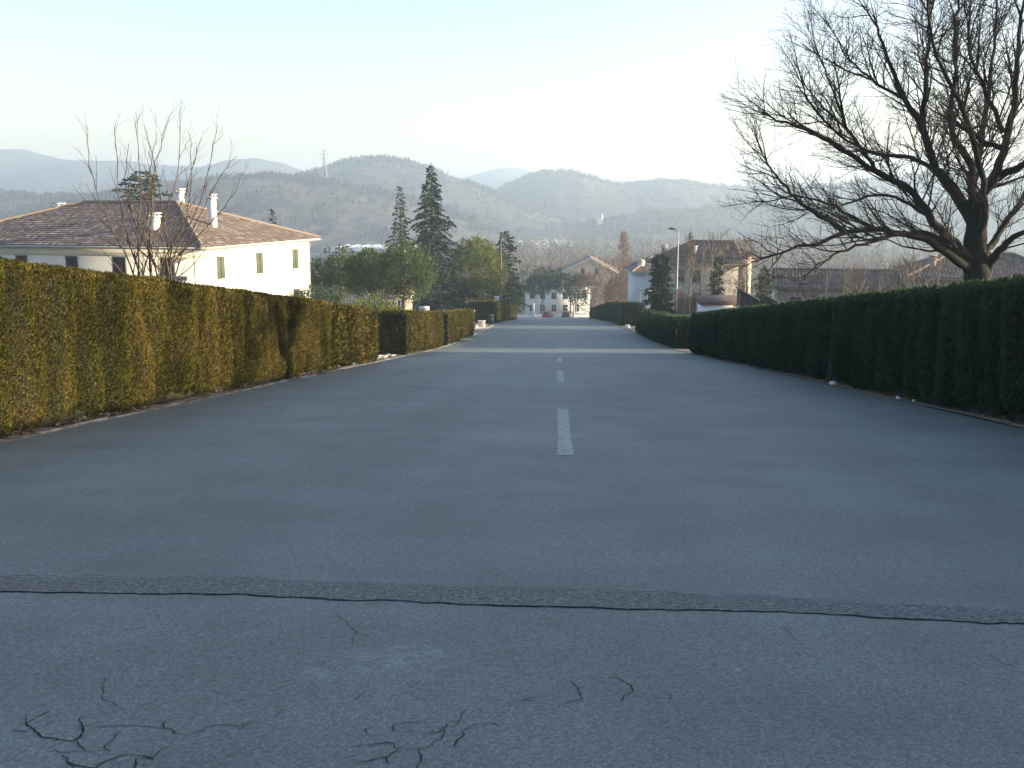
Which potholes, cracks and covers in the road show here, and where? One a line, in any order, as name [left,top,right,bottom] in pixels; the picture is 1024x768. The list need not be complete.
crack [354,708,497,768]
crack [14,678,255,768]
